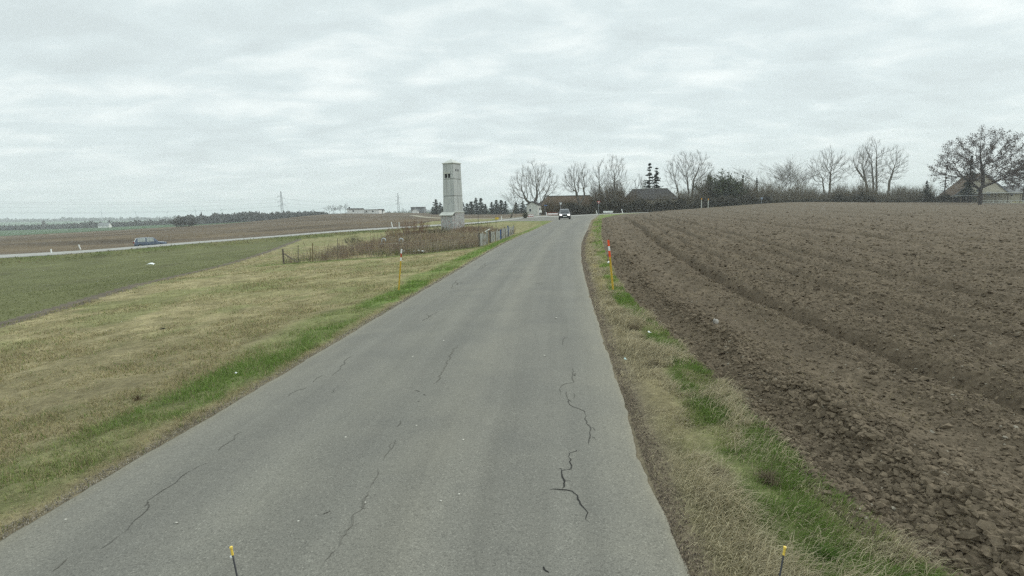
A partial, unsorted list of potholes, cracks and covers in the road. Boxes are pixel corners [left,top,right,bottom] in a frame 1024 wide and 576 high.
crack [100,433,238,549]
crack [558,370,595,519]
